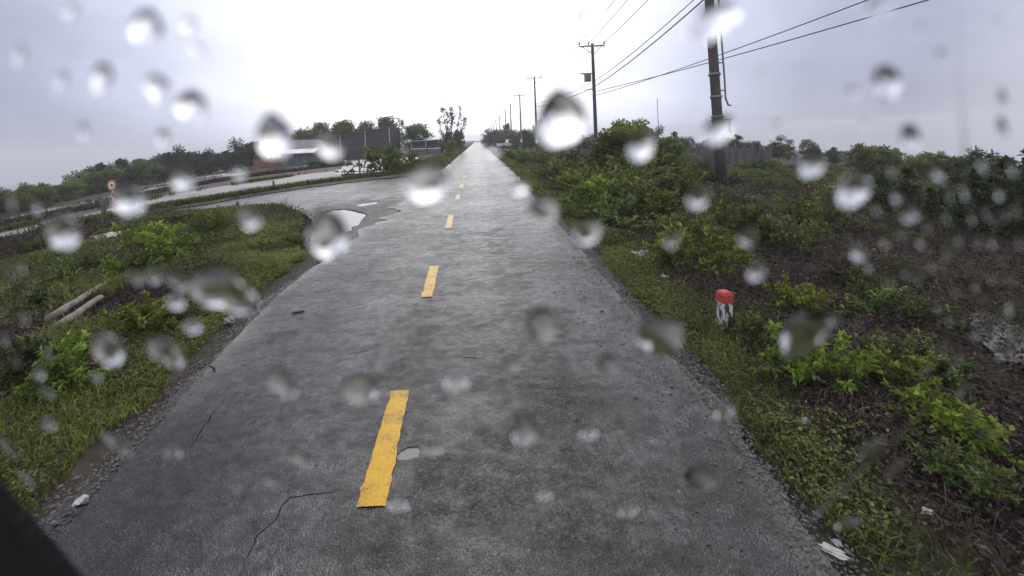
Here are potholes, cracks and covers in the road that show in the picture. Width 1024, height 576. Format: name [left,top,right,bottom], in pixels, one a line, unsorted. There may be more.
crack [242,485,342,571]
pothole [396,446,421,460]
pothole [331,209,367,231]
